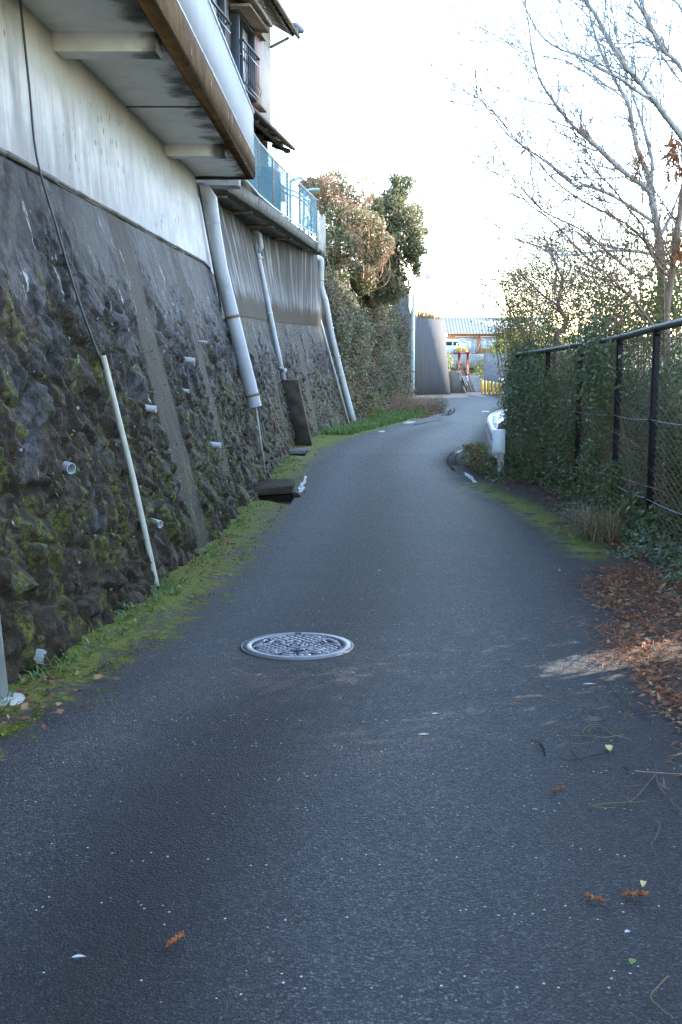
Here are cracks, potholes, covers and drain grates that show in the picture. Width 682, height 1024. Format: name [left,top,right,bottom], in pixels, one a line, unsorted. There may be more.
manhole cover [240,632,354,660]
